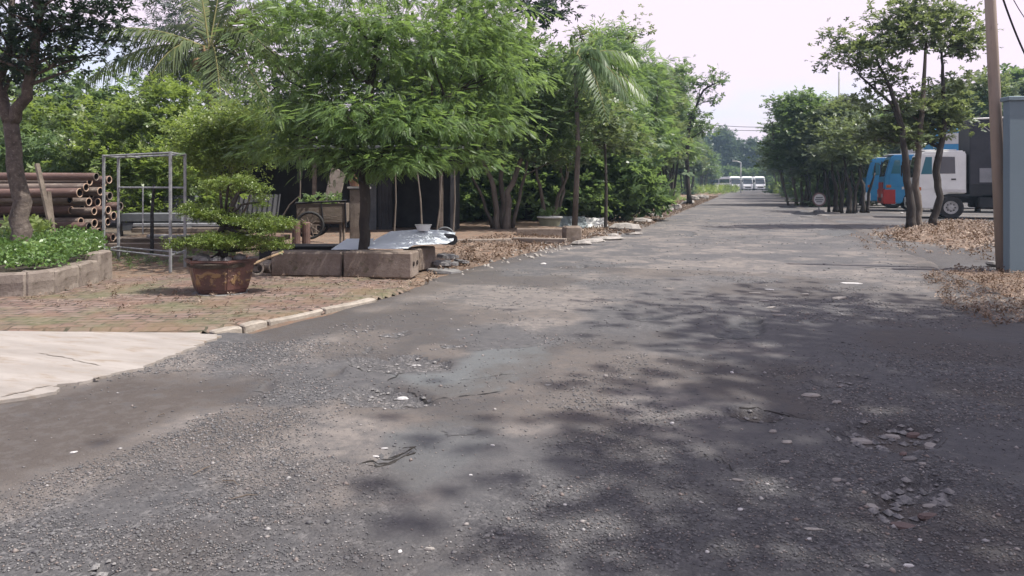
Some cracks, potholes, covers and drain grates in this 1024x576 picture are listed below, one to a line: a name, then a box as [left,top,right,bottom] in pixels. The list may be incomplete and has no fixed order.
pothole [866,477,955,530]
pothole [826,419,947,453]
pothole [342,385,436,410]
pothole [346,354,453,374]
crack [388,374,502,404]
pothole [722,405,790,423]
